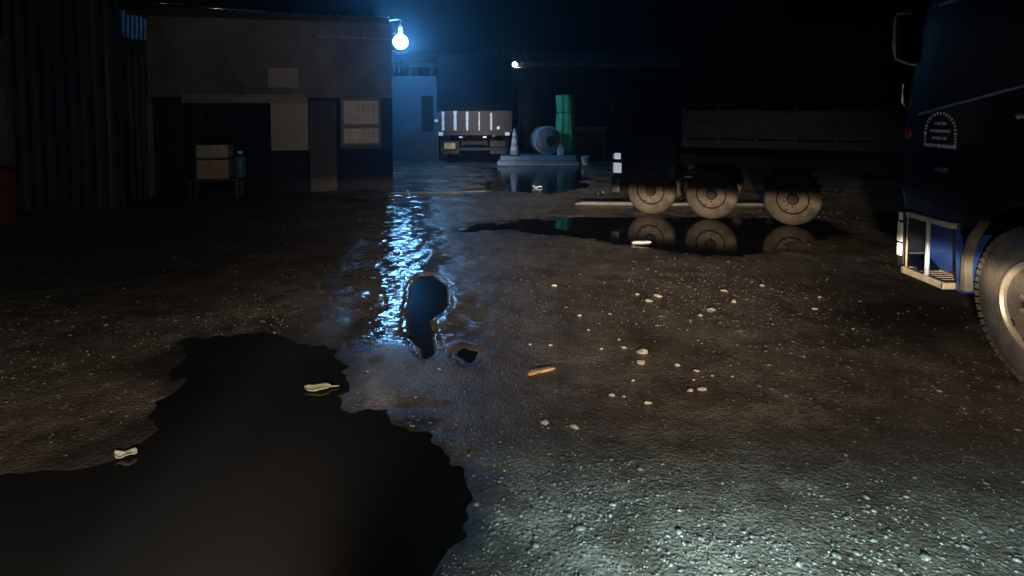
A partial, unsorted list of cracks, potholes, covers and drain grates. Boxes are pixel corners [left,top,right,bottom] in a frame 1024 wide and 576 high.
pothole [451,345,484,366]
pothole [402,273,453,361]
